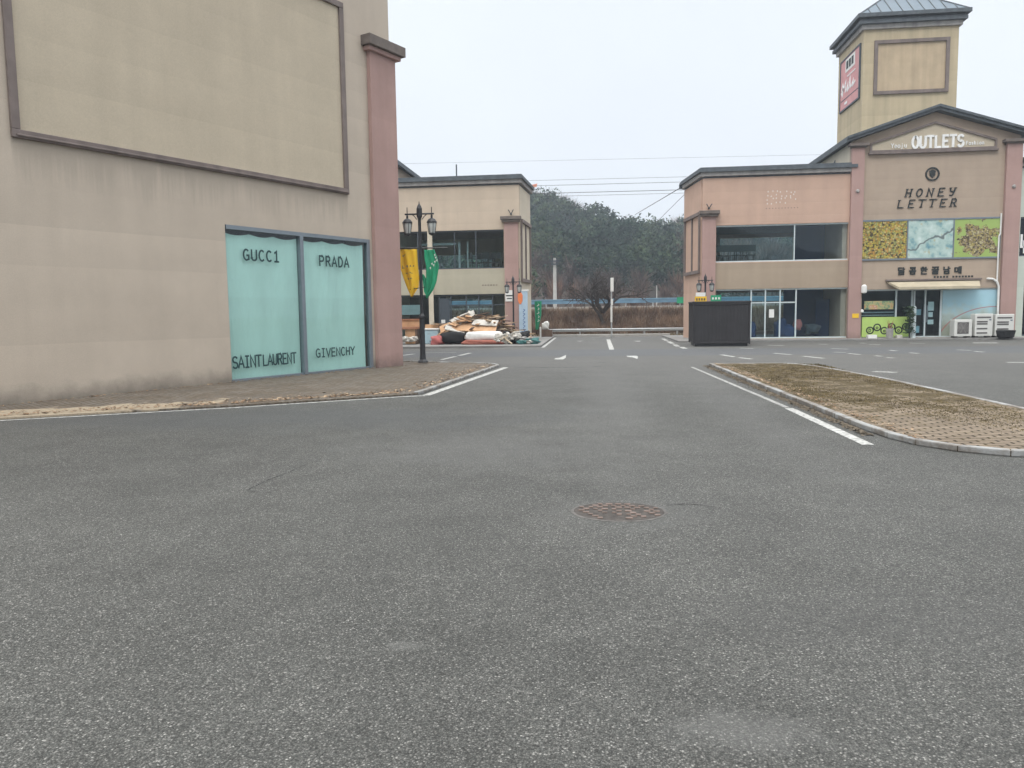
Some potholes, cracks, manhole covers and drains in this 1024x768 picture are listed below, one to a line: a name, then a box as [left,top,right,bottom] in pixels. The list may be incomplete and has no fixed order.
manhole cover [570,502,669,522]
